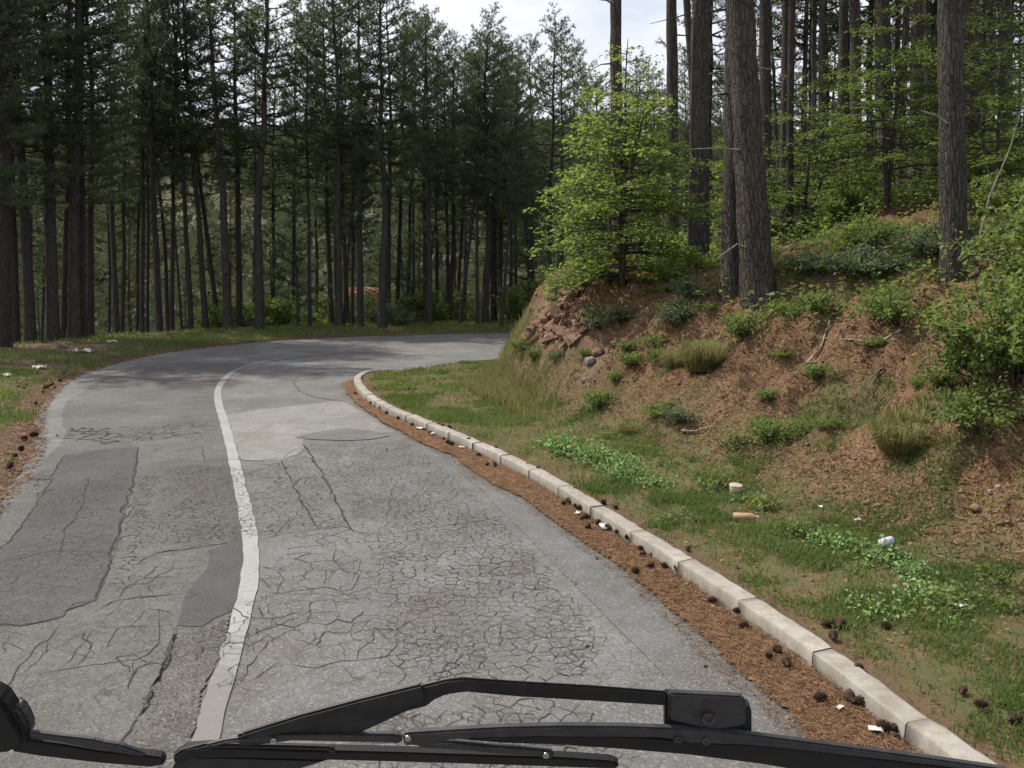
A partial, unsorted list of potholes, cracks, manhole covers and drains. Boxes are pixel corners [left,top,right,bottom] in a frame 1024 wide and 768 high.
crack [0,420,606,742]
crack [186,529,635,768]
